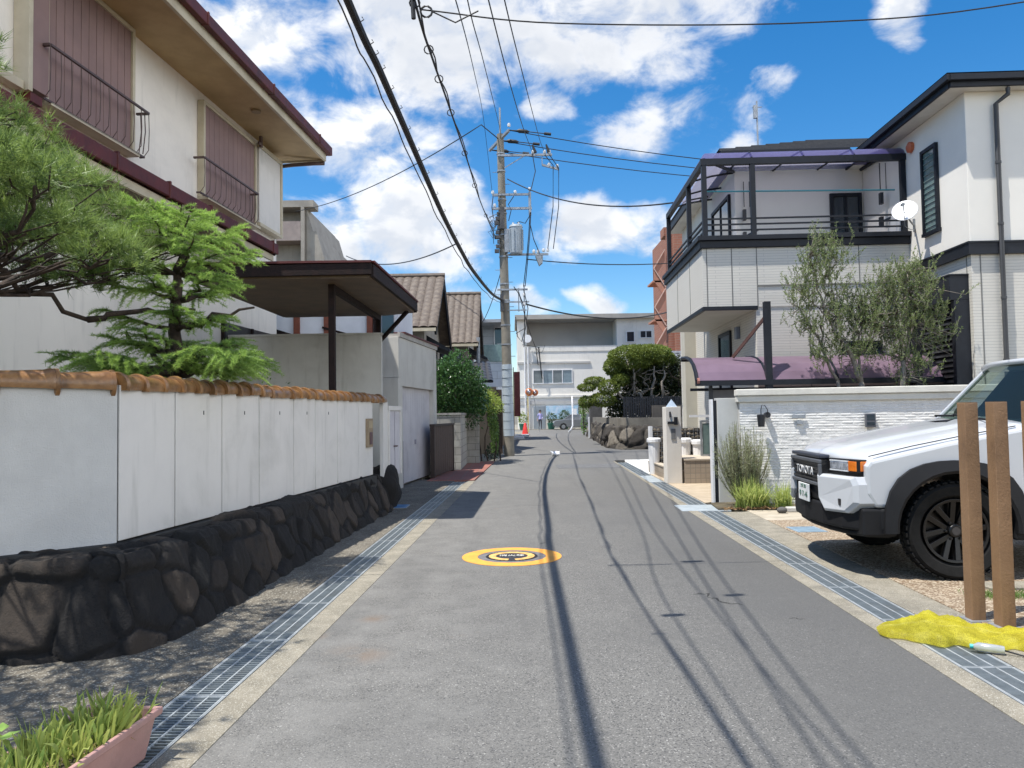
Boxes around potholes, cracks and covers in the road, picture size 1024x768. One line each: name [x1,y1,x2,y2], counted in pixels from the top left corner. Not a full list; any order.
drain grate [250,603,330,640]
drain grate [378,528,414,541]
drain grate [133,696,226,768]
drain grate [881,620,1013,668]
drain grate [178,640,289,697]
drain grate [359,541,399,557]
drain grate [714,520,756,532]
drain grate [298,576,360,603]
drain grate [827,587,915,620]
drain grate [757,545,816,564]
drain grate [699,511,735,520]
